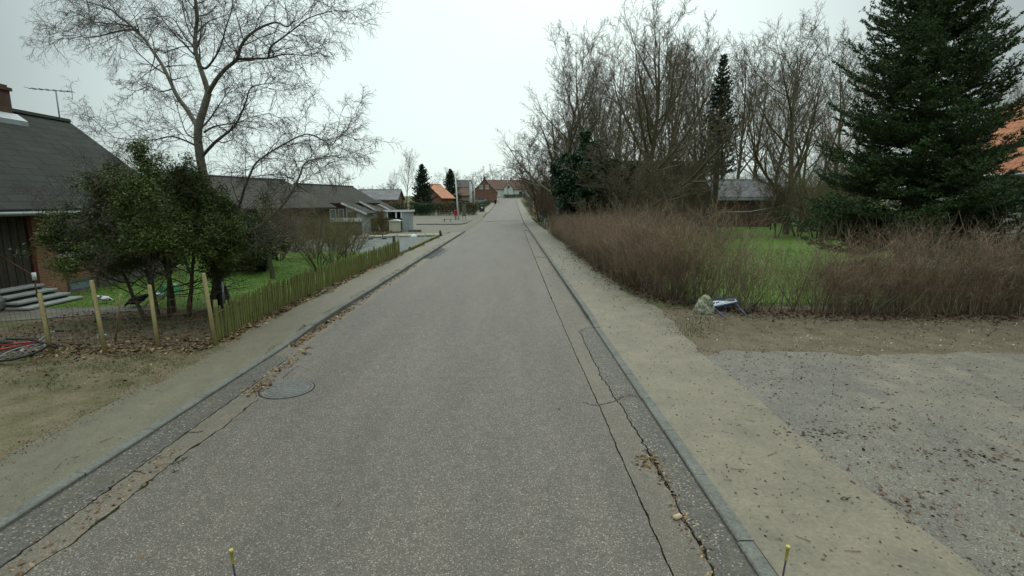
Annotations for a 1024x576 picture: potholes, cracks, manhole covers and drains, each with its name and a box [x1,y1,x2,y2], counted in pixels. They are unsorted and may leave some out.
manhole cover [258,380,315,399]
crack [0,359,294,576]
crack [578,327,714,576]
